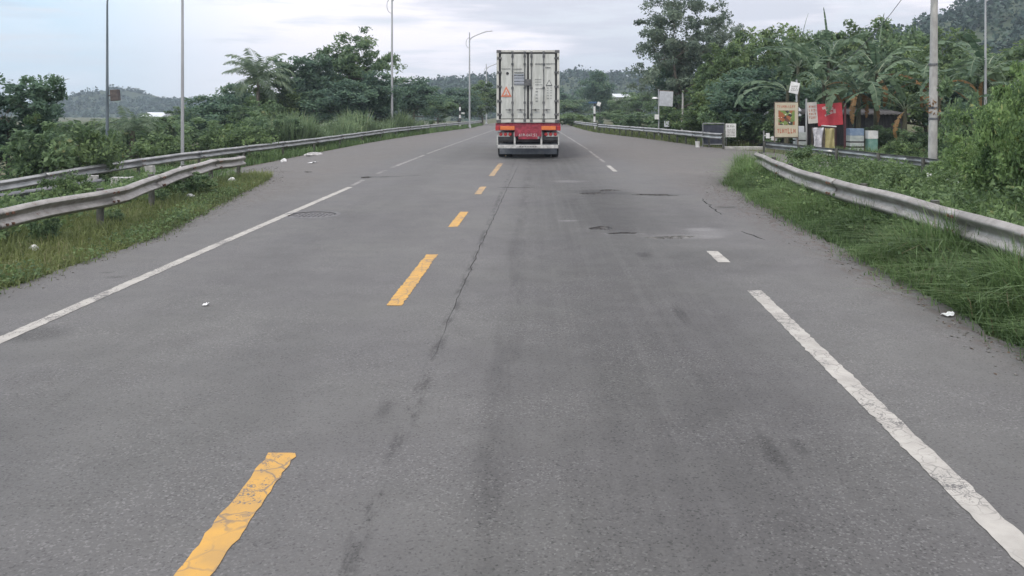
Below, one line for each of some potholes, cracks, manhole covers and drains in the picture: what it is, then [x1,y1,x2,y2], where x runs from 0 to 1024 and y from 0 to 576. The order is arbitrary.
crack [432,172,528,358]
manhole cover [286,211,341,219]
